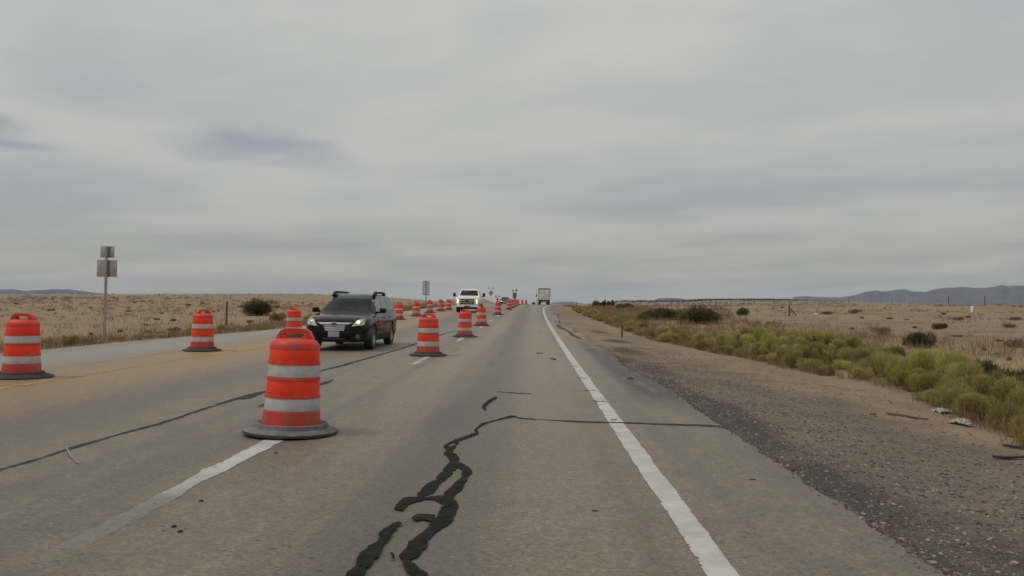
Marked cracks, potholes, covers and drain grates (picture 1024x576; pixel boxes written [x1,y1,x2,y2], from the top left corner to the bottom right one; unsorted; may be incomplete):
crack [555,313,581,339]
